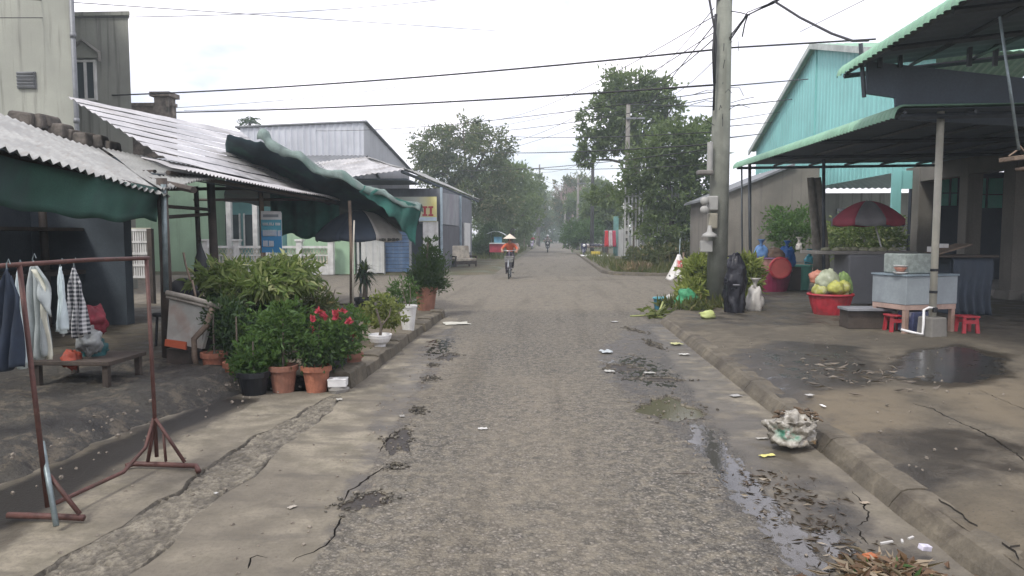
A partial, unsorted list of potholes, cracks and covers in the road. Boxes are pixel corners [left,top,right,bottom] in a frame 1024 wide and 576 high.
crack [34,394,394,576]
crack [939,499,978,527]
pothole [627,391,719,424]
pothole [408,405,431,415]
crack [915,404,1024,461]
pothole [324,487,407,519]
pothole [428,351,466,361]
pothole [600,362,652,374]
crack [852,491,870,544]
pothole [377,424,416,456]
